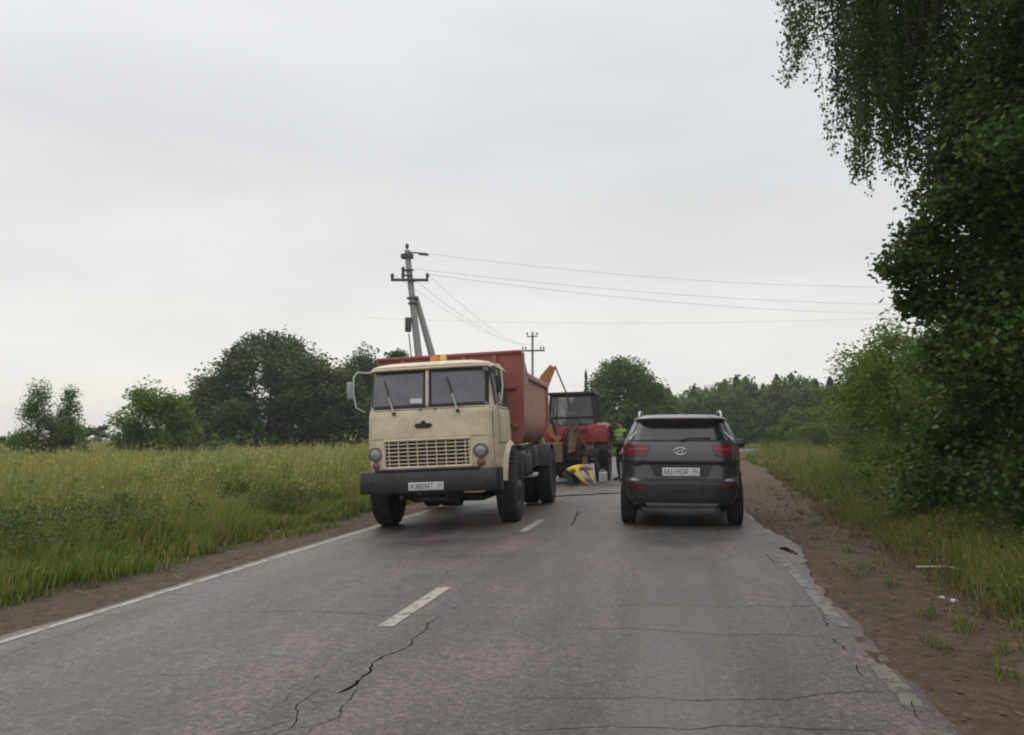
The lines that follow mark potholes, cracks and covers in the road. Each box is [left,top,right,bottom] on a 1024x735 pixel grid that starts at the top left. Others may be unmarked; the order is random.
crack [565,615,884,701]
crack [541,493,621,542]
crack [230,606,459,735]
